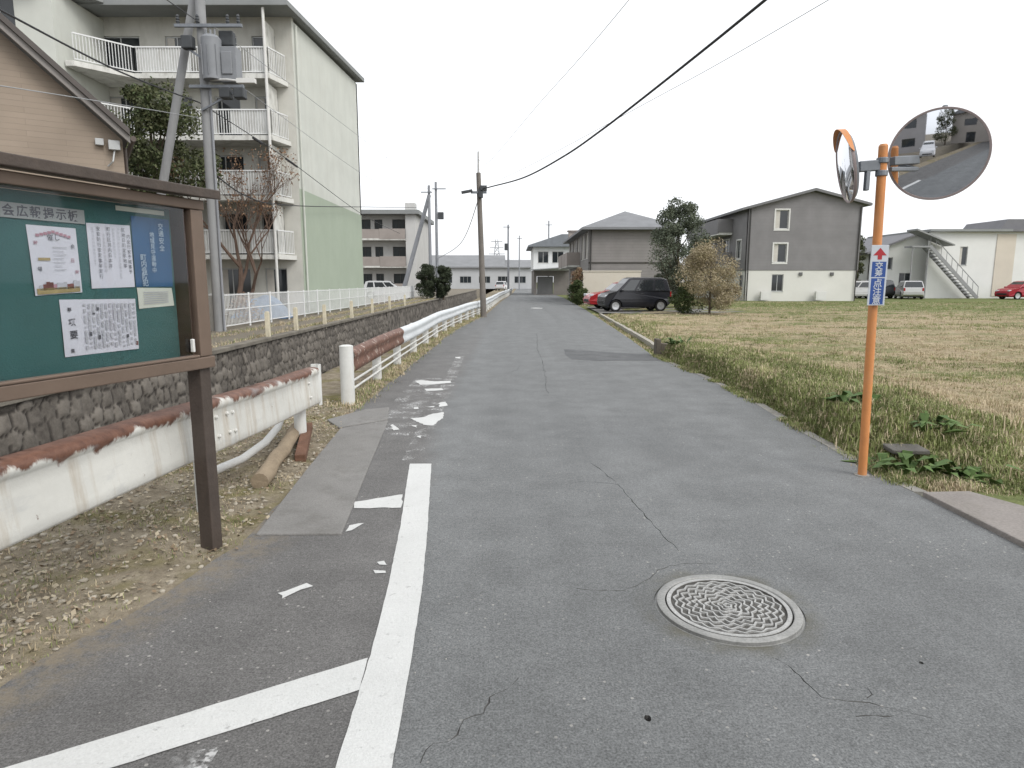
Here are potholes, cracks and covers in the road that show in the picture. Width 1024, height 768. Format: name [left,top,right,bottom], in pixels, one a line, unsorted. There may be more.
manhole cover [654,574,806,647]
crack [420,678,518,763]
crack [775,658,933,719]
crack [570,462,710,591]
